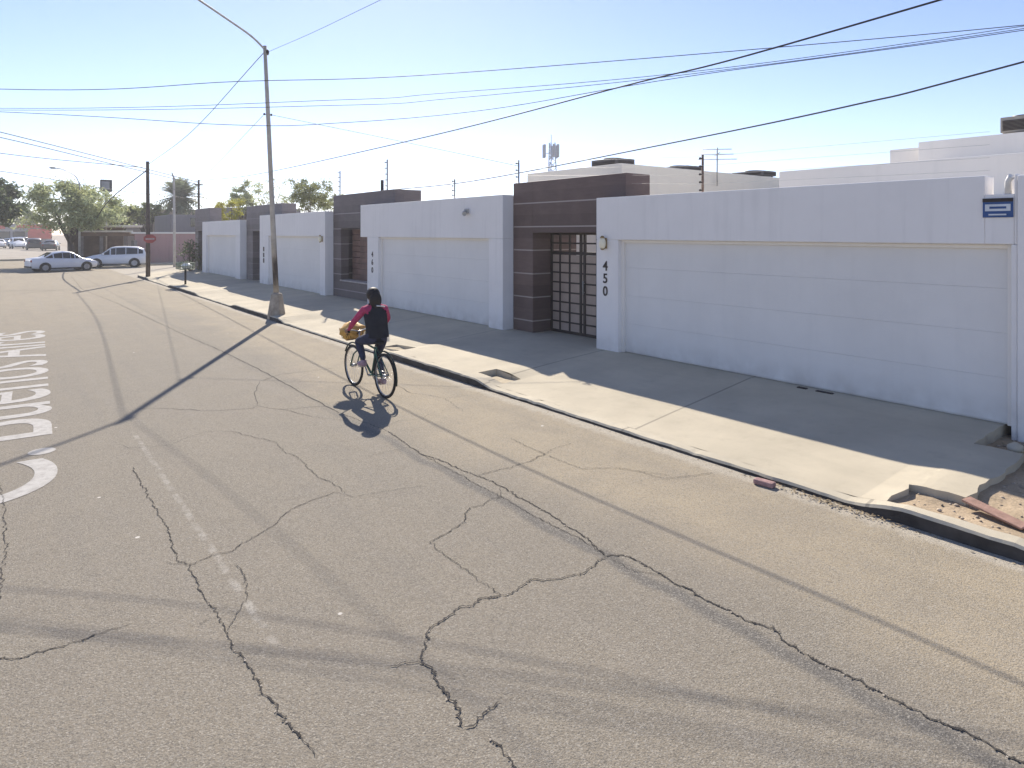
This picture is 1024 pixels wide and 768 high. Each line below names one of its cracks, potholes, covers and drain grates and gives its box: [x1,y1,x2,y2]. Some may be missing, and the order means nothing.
crack [71,276,1024,768]
crack [0,624,128,659]
crack [0,487,10,599]
